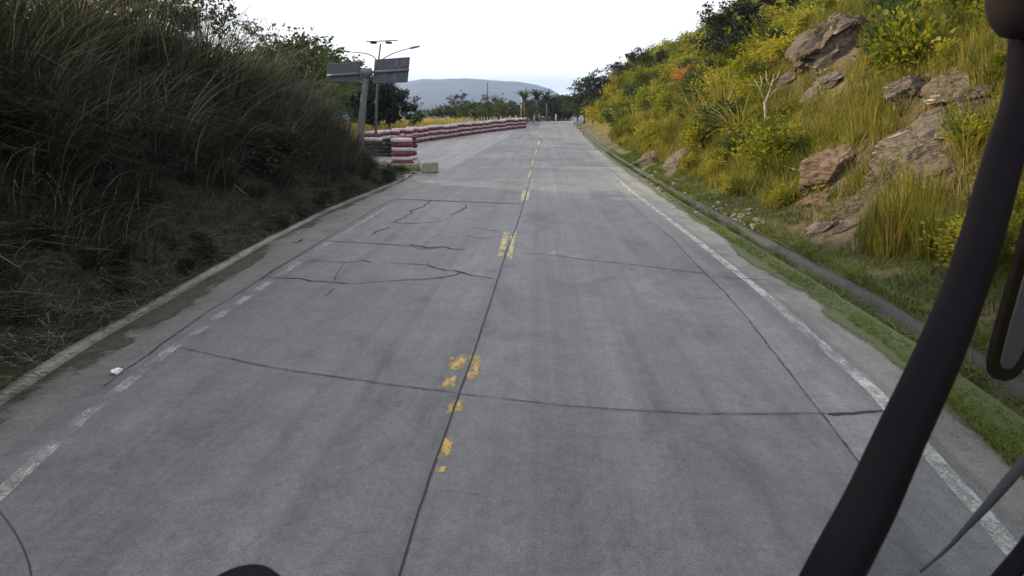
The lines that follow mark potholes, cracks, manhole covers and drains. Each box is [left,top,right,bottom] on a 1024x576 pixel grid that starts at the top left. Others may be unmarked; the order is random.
crack [271,200,503,295]
